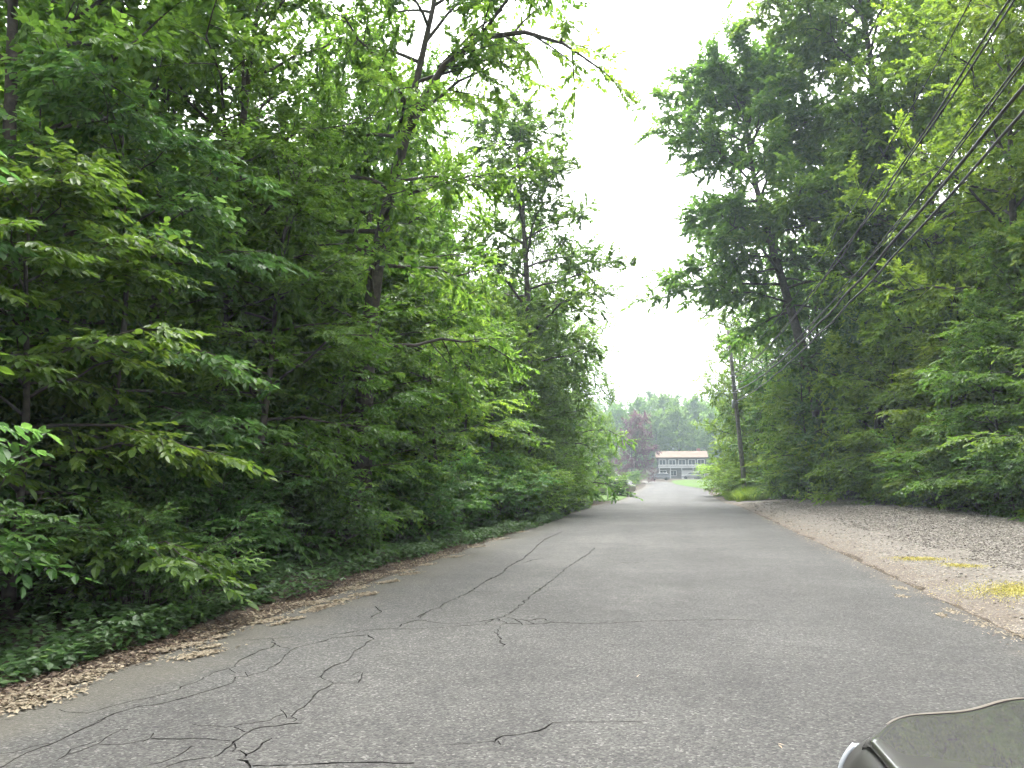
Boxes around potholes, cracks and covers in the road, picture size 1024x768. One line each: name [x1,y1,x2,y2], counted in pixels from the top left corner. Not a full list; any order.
crack [0,534,771,768]
